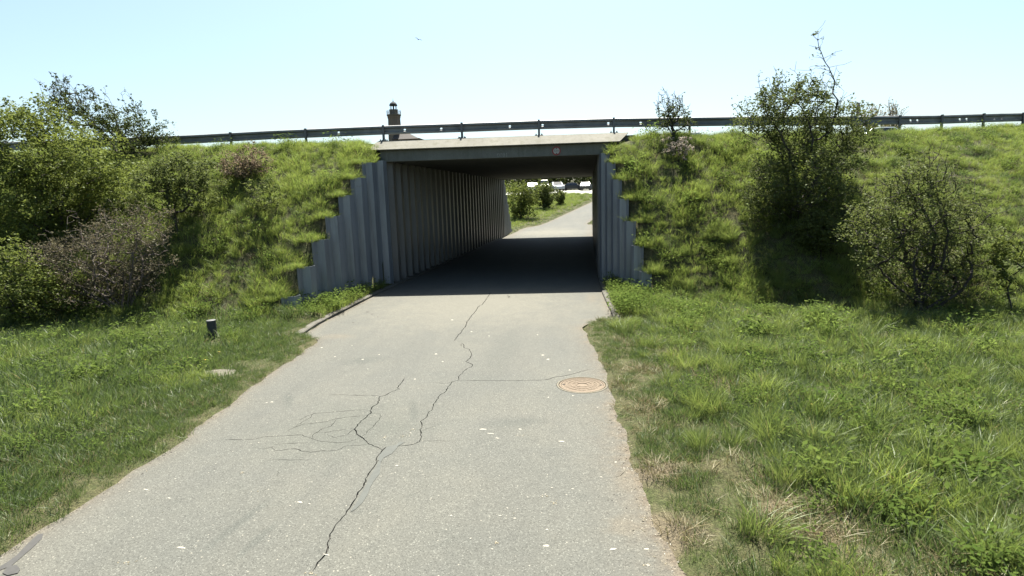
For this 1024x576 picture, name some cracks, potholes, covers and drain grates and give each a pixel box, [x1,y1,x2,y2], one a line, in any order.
manhole cover [557,377,608,394]
crack [226,293,582,569]
